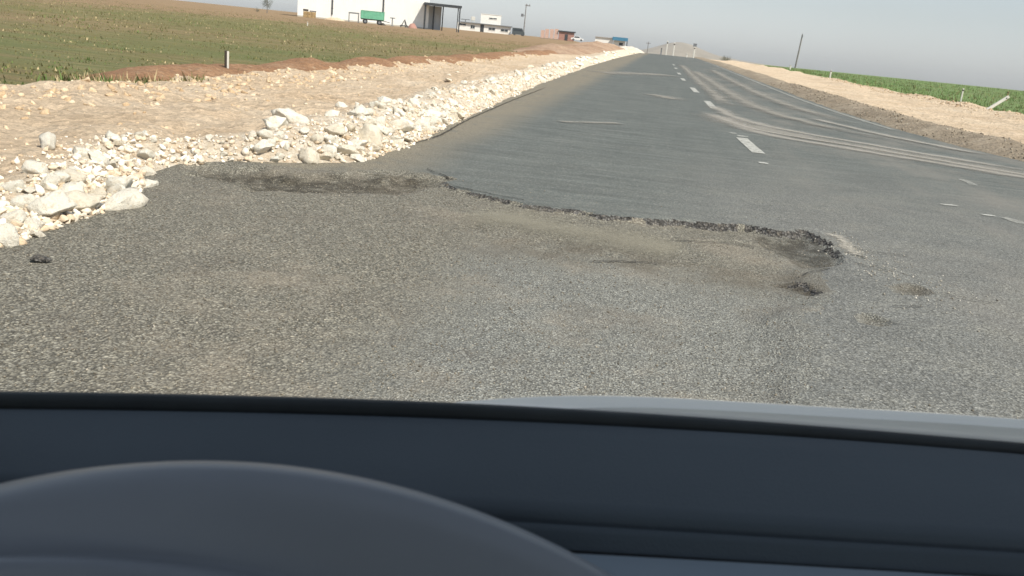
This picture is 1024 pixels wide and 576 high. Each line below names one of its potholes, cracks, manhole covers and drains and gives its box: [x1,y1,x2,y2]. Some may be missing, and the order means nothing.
pothole [854,312,894,327]
pothole [887,282,937,297]
pothole [0,161,846,405]
